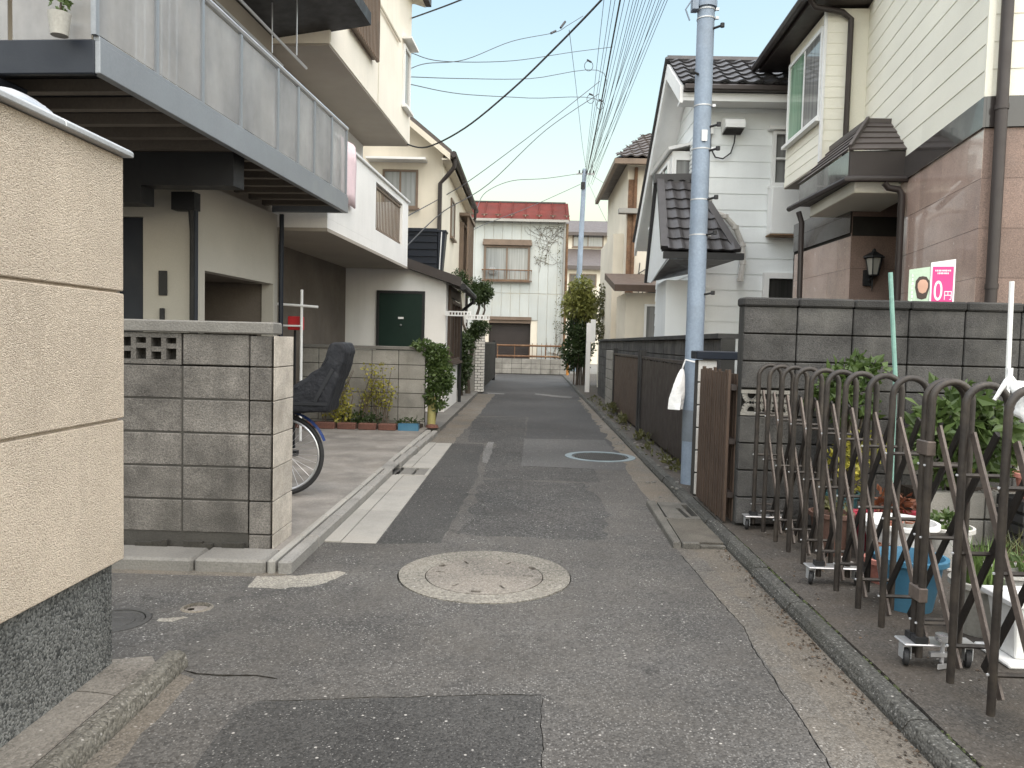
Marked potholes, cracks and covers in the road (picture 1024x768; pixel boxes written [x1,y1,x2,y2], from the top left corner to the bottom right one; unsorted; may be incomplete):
utility cover [180,602,214,613]
manhole cover [112,608,152,633]
manhole cover [565,451,635,462]
manhole cover [398,551,571,604]
drain grate [646,501,726,550]
